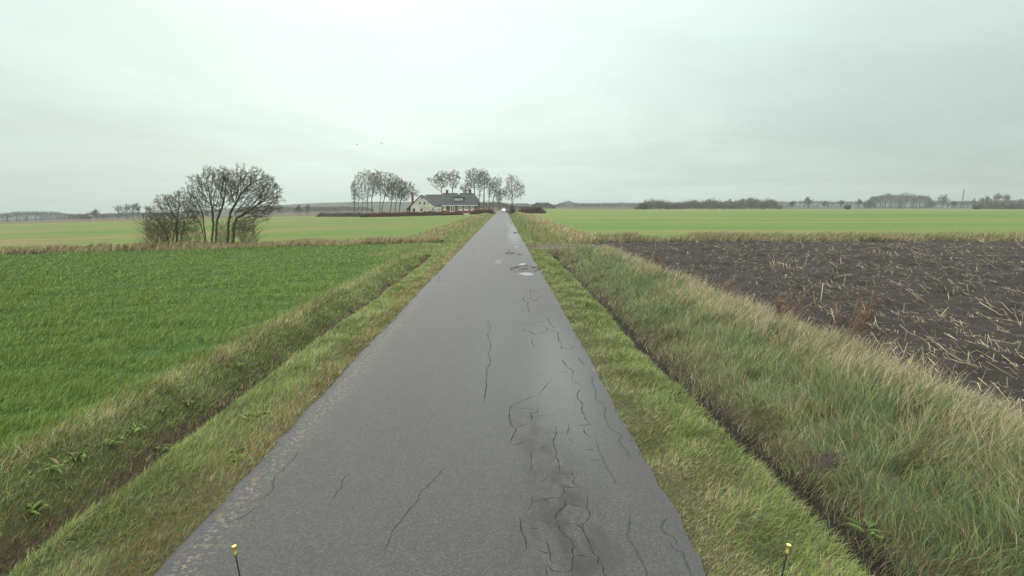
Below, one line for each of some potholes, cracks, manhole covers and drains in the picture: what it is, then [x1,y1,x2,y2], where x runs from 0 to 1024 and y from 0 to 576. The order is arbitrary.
crack [508,290,606,576]
crack [385,472,441,553]
